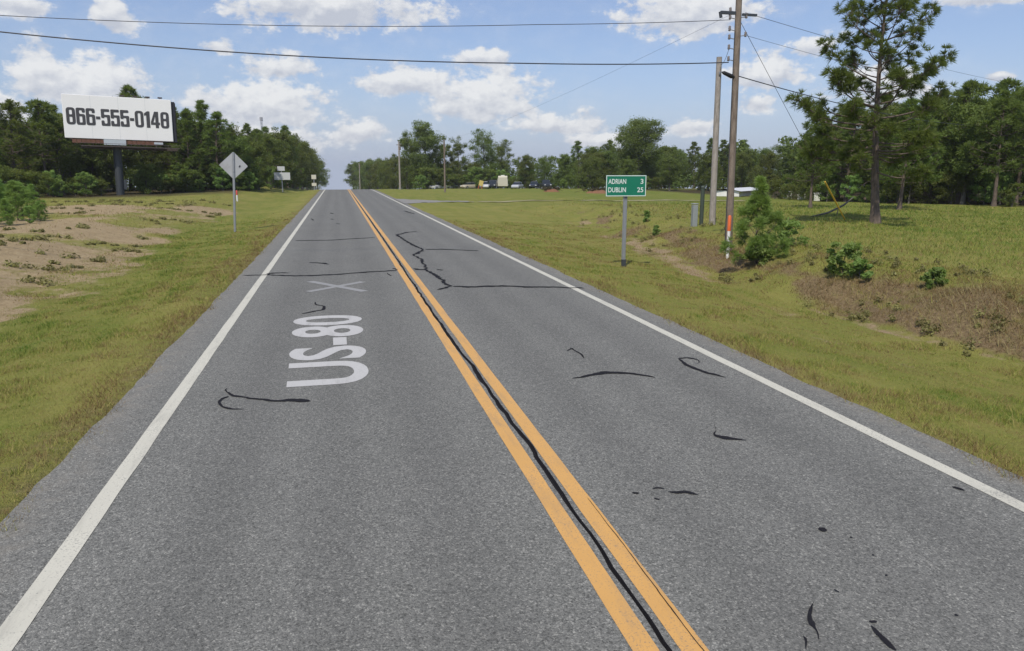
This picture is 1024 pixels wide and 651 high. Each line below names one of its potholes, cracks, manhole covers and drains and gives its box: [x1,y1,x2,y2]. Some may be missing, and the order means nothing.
crack [265,231,582,290]
crack [713,423,744,440]
